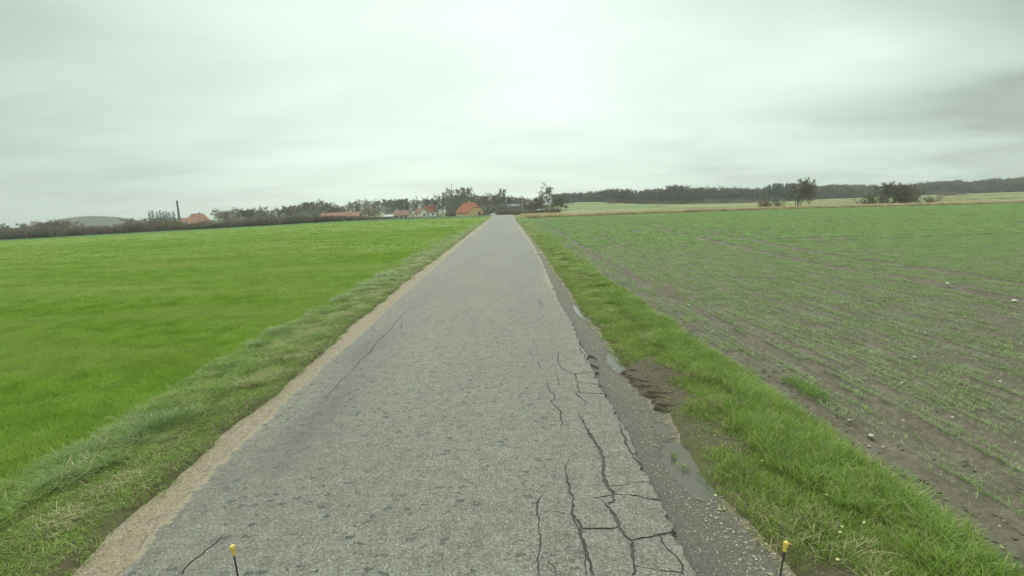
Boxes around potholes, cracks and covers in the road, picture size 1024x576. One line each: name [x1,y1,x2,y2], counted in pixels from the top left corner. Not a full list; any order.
crack [316,309,407,411]
crack [181,534,225,574]
crack [531,348,684,576]
